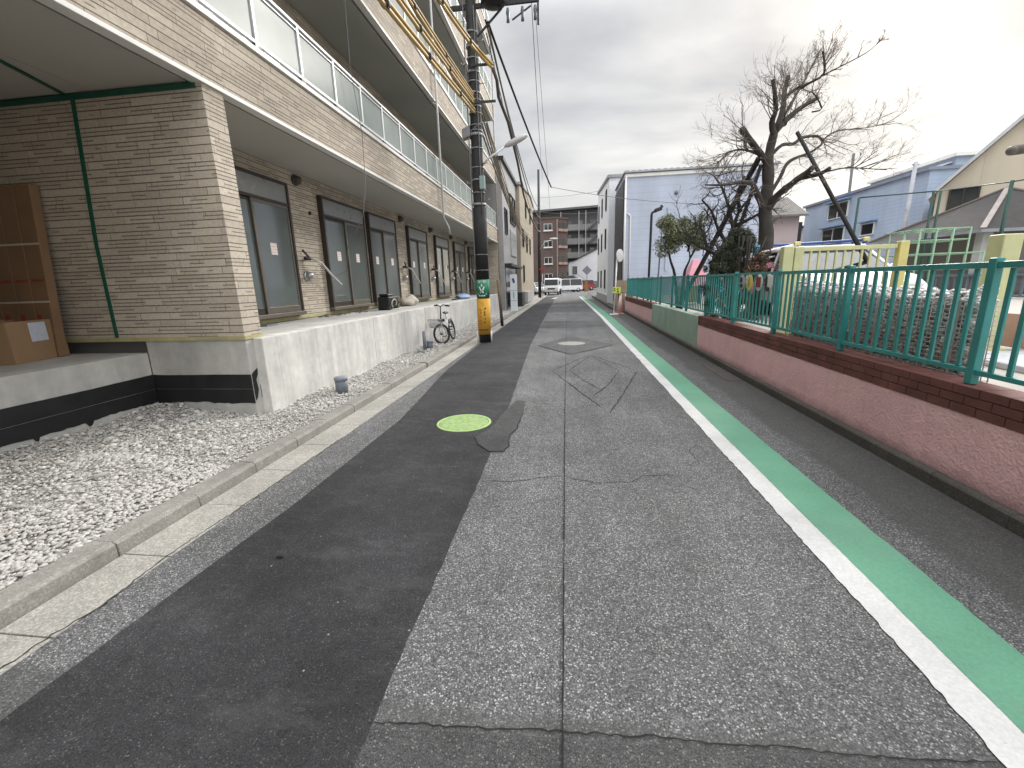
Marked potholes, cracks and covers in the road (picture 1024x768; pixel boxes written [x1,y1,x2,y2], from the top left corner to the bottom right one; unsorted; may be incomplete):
manhole cover [538,336,612,354]
crack [369,721,998,763]
manhole cover [437,414,491,432]
crack [493,446,698,483]
